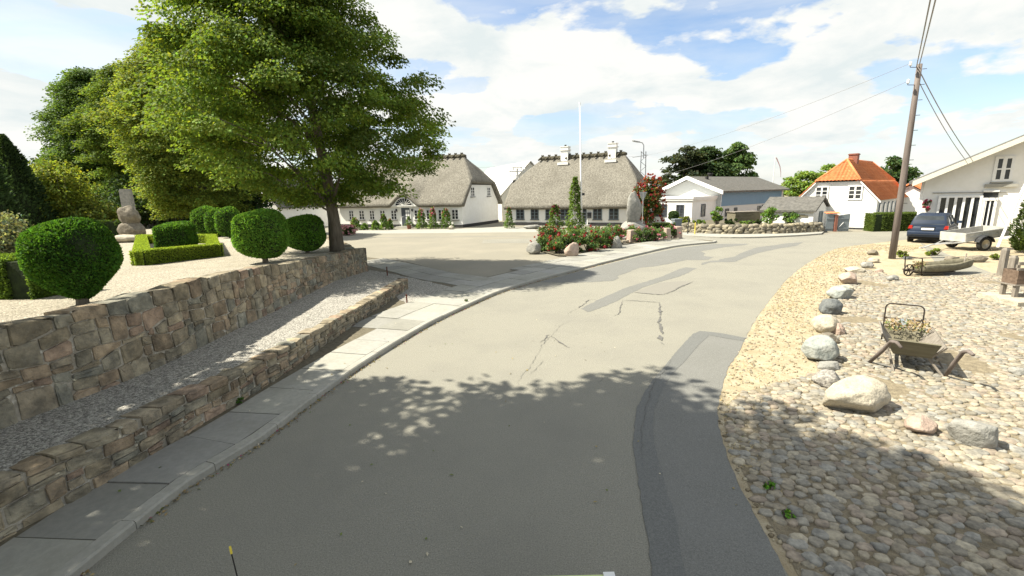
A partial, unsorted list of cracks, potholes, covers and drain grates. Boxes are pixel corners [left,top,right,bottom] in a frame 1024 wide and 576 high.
crack [618,282,691,344]
